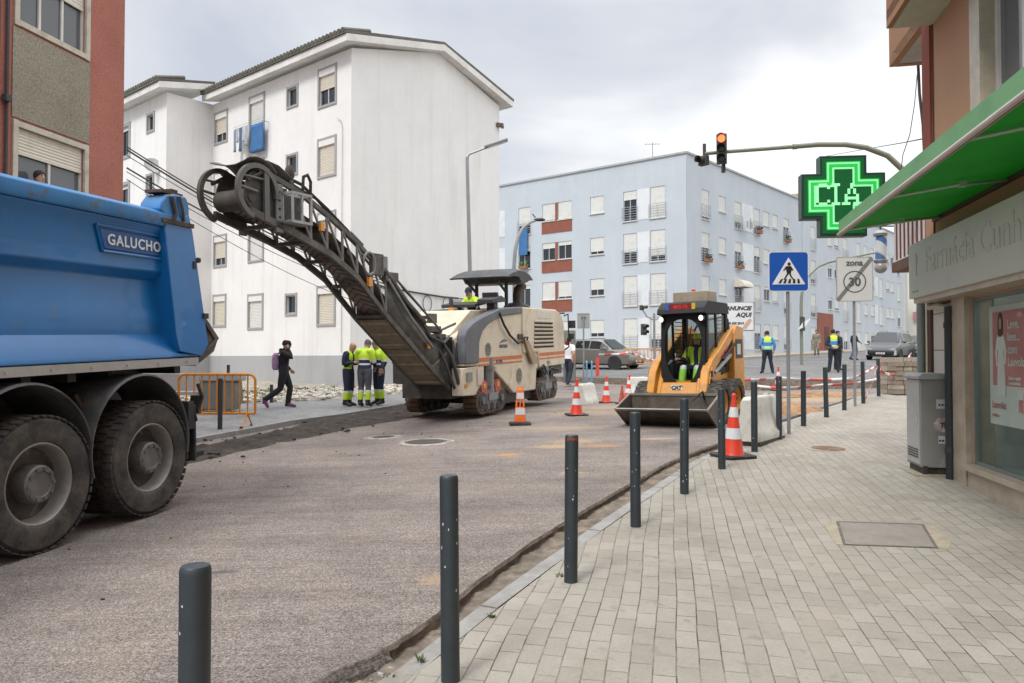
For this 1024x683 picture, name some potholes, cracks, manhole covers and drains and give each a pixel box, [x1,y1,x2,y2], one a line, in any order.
manhole cover [399,438,454,446]
manhole cover [826,521,951,550]
